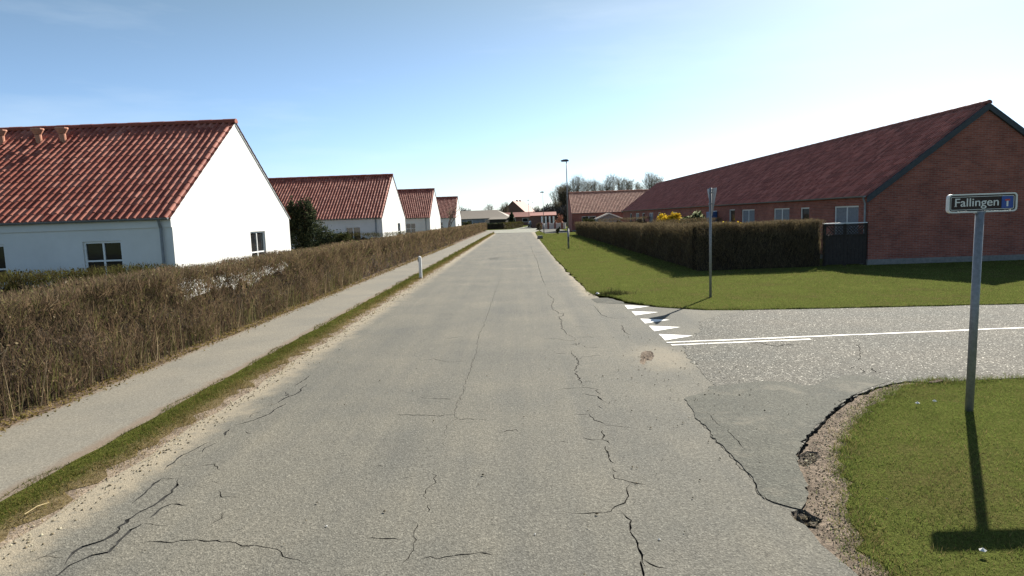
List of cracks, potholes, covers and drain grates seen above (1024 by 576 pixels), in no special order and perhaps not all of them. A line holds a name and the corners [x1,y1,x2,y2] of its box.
pothole [797,451,820,467]
crack [134,376,309,563]
crack [532,253,667,576]
pothole [791,510,822,528]
crack [370,475,496,565]
